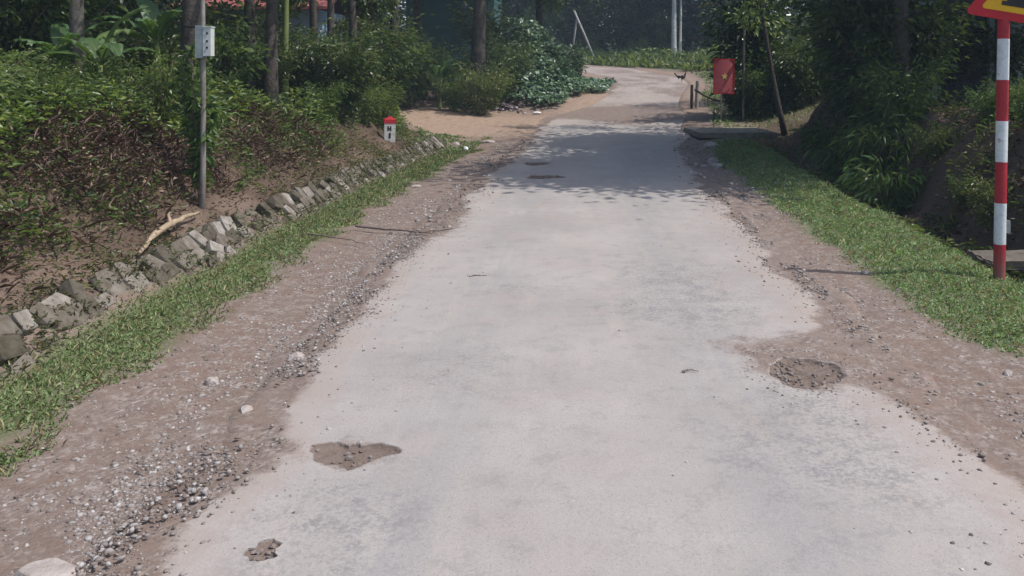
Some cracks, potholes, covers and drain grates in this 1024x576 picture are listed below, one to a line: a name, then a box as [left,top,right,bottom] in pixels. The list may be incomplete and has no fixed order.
pothole [767,356,847,390]
pothole [243,538,283,561]
pothole [308,442,403,471]
